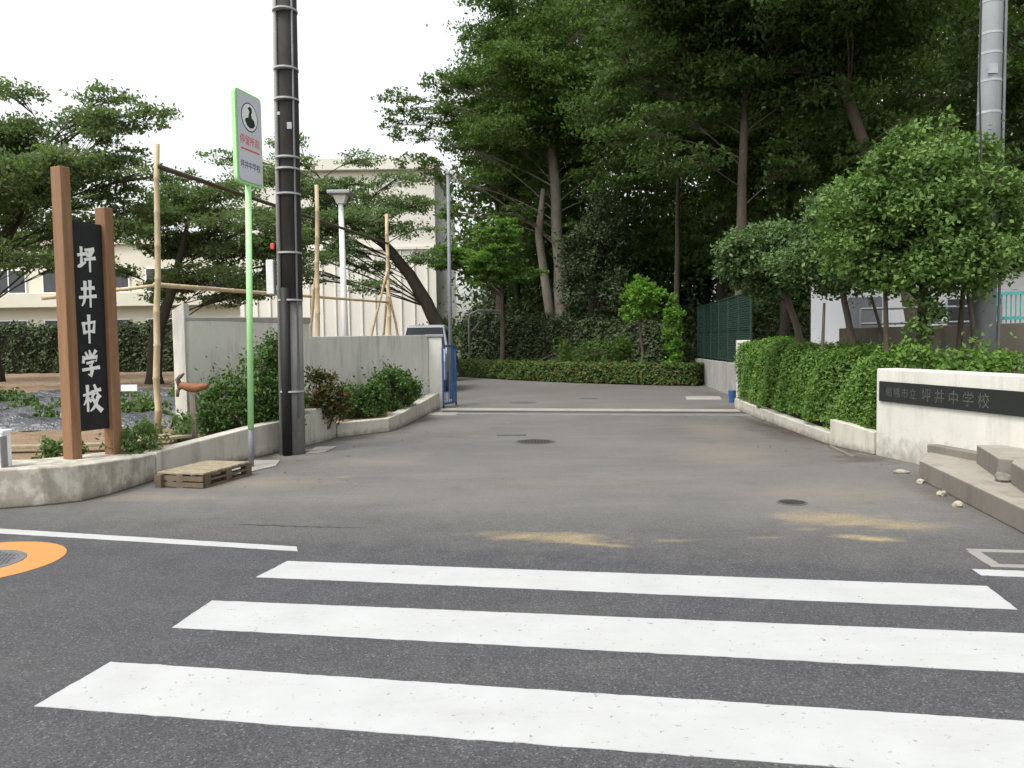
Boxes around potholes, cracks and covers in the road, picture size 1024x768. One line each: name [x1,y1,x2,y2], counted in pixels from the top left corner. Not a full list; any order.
manhole cover [0,541,67,578]
